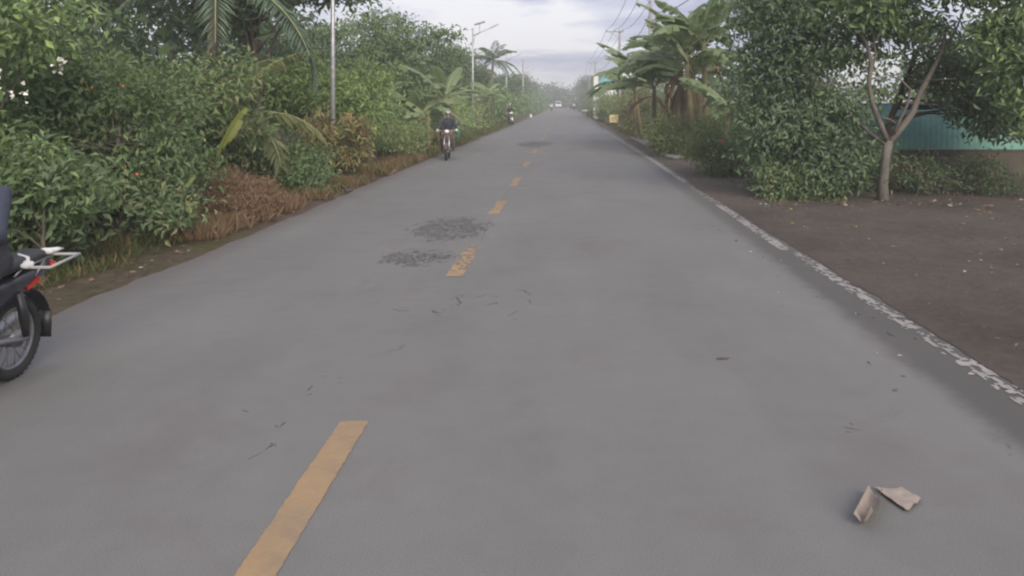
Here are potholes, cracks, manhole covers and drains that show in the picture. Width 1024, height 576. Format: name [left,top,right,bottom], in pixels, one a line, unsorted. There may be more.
pothole [376,249,459,268]
pothole [404,217,494,243]
crack [432,290,531,317]
